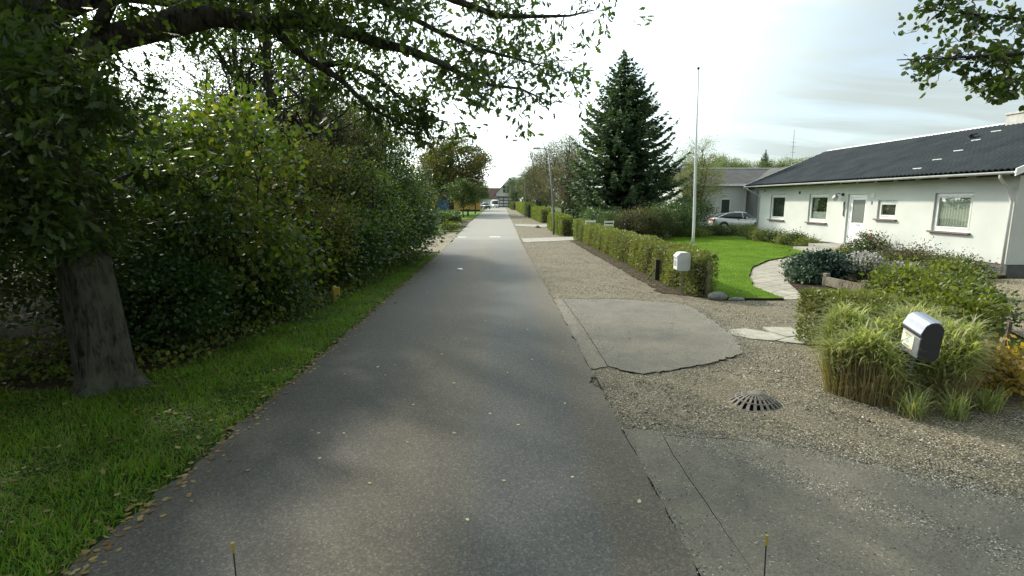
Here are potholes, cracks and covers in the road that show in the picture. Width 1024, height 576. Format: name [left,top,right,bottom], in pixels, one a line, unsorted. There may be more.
drain grate [729,391,785,413]
